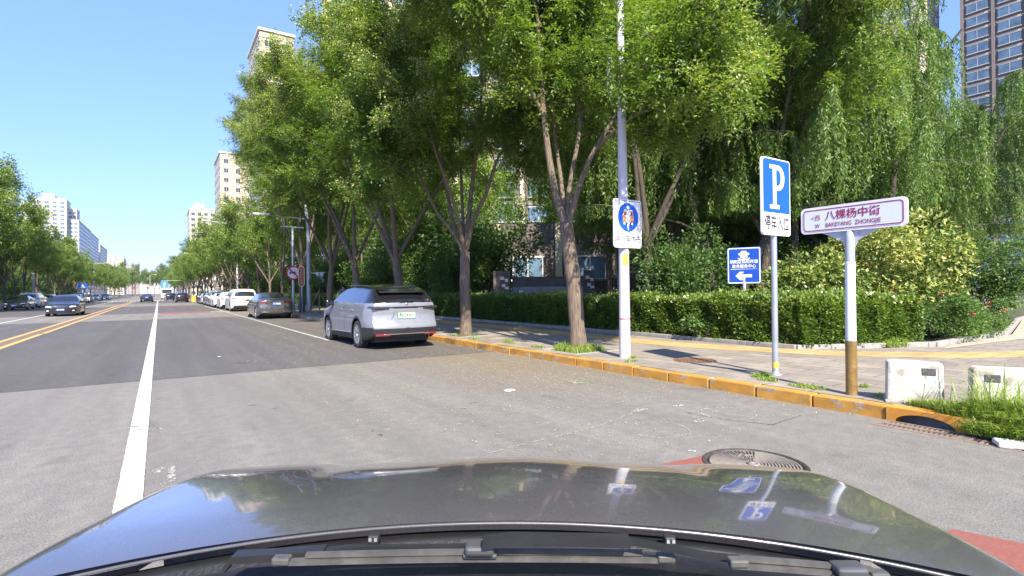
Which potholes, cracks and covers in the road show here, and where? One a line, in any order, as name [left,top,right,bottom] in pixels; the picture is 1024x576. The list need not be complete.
drain grate [872,419,968,440]
drain grate [886,404,999,435]
manhole cover [702,448,811,471]
